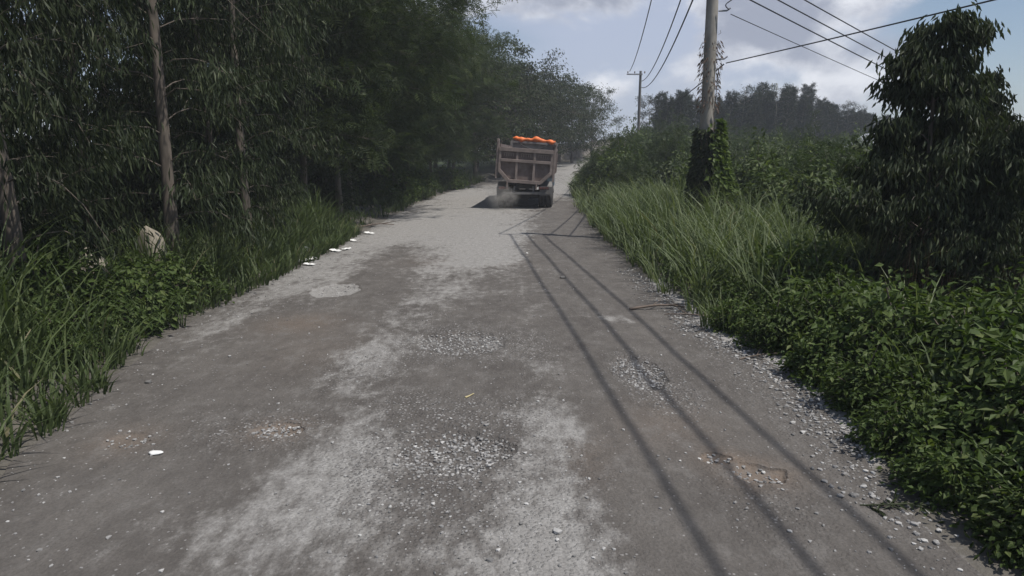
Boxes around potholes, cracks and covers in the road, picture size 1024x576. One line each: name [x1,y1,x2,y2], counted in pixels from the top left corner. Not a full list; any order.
pothole [390,430,519,476]
pothole [414,330,508,356]
pothole [608,355,670,391]
pothole [247,422,305,438]
pothole [97,432,154,450]
pothole [697,451,733,465]
pothole [730,462,788,484]
